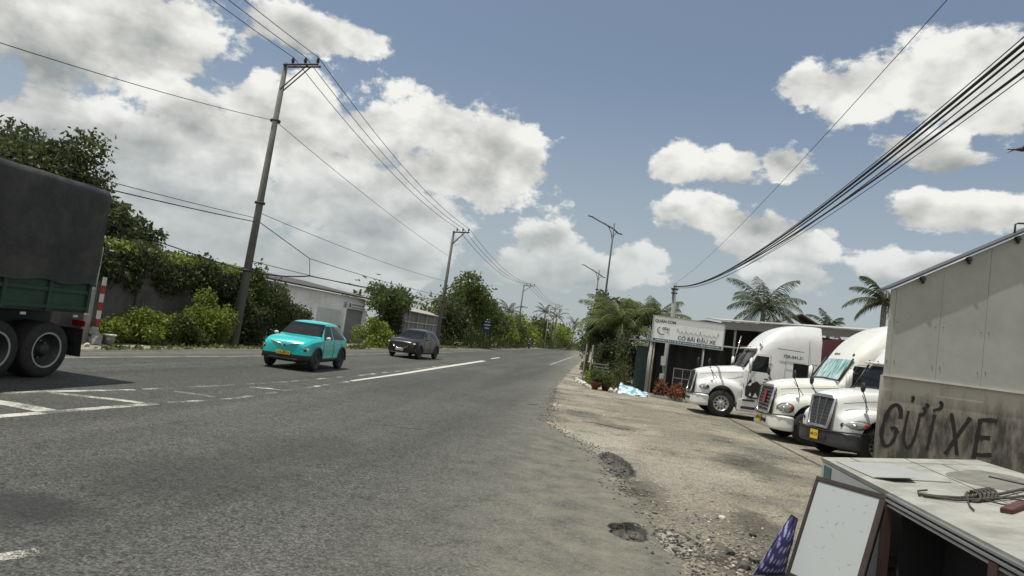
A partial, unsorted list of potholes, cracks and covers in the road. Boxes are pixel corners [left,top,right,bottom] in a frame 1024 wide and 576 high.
pothole [597,452,636,478]
pothole [607,522,649,542]
